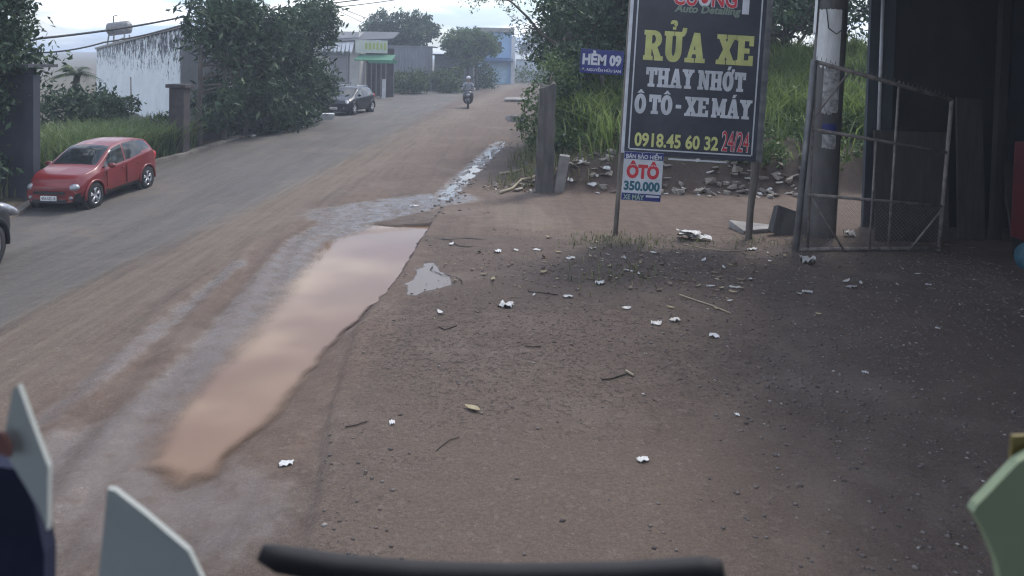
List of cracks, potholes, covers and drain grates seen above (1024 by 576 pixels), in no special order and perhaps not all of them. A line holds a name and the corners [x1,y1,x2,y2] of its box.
pothole [401,261,456,296]
pothole [83,220,434,511]
